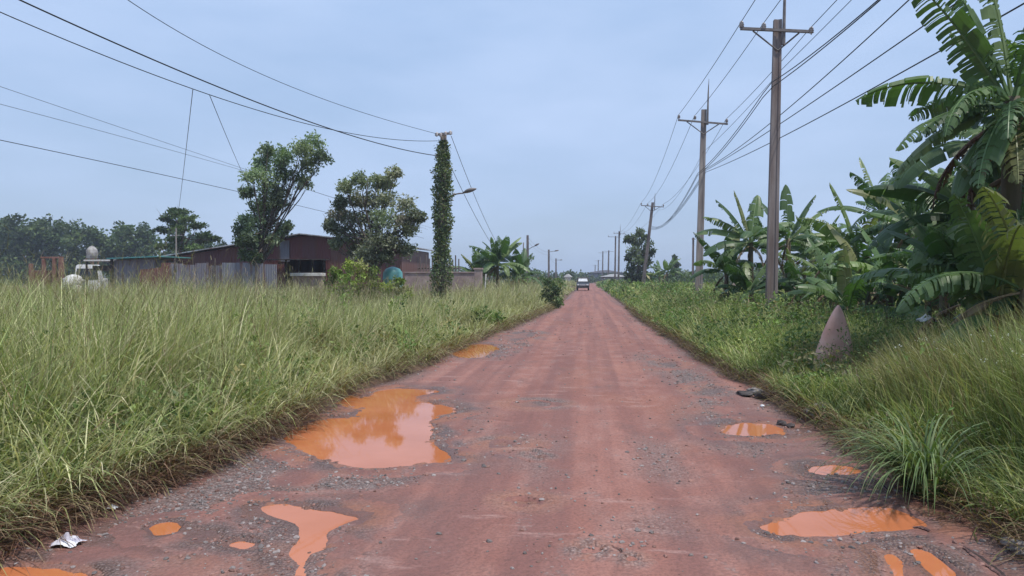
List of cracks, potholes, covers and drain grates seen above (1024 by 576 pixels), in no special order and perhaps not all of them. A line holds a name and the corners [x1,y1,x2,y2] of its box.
pothole [209,490,403,576]
pothole [892,539,1000,576]
pothole [441,342,521,361]
pothole [251,384,496,479]
pothole [156,520,246,555]
pothole [841,542,924,576]
